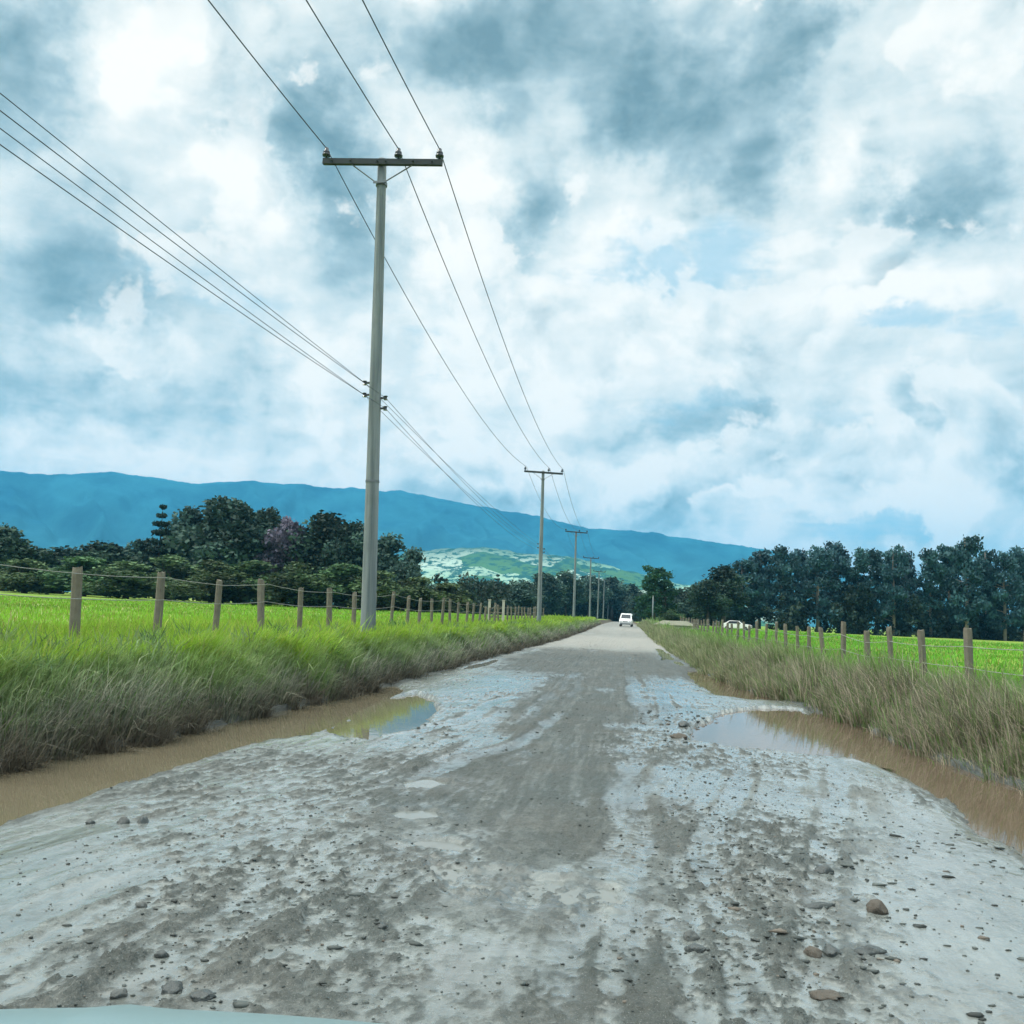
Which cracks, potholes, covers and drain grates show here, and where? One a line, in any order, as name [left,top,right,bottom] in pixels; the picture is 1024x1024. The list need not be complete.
pothole [315,689,444,740]
pothole [393,776,459,789]
pothole [680,705,895,770]
pothole [377,803,455,821]
